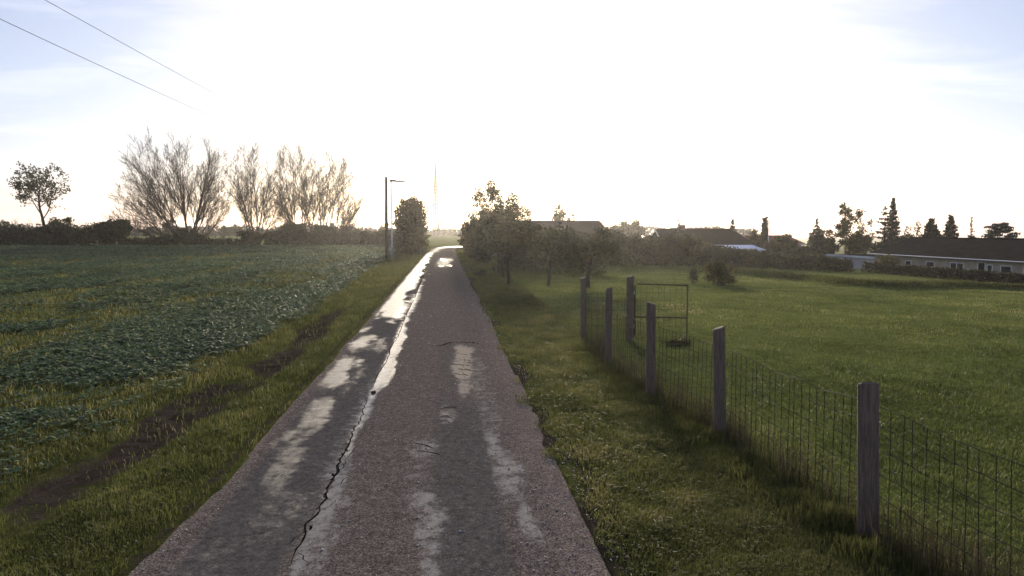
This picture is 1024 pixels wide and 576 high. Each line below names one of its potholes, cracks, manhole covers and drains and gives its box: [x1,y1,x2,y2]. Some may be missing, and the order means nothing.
crack [288,283,421,567]
crack [434,342,479,381]
